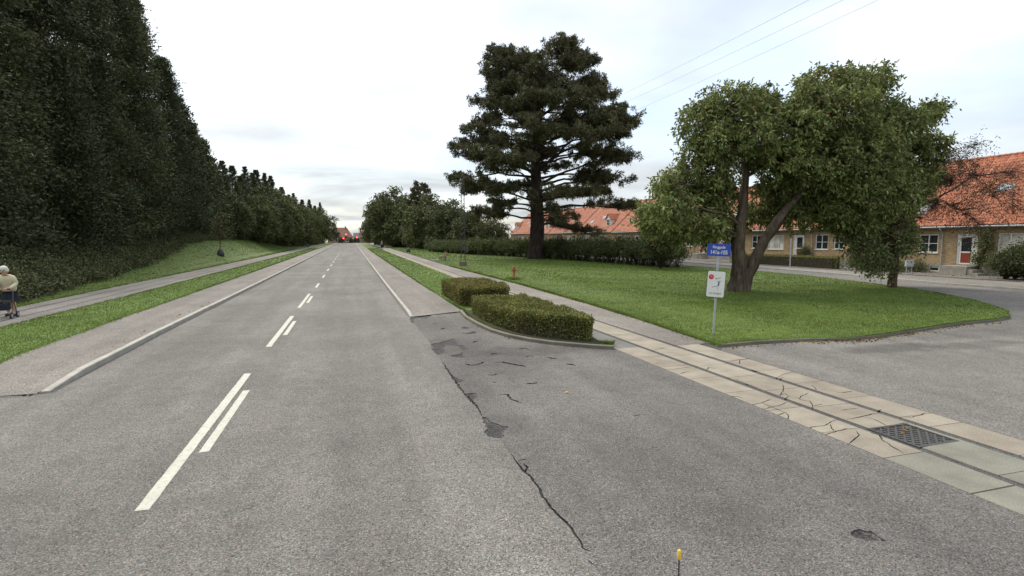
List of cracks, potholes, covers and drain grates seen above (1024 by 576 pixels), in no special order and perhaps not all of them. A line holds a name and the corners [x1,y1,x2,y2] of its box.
crack [442,341,537,416]
crack [734,358,895,448]
pothole [482,417,508,438]
crack [512,455,589,551]
pothole [851,529,887,542]
